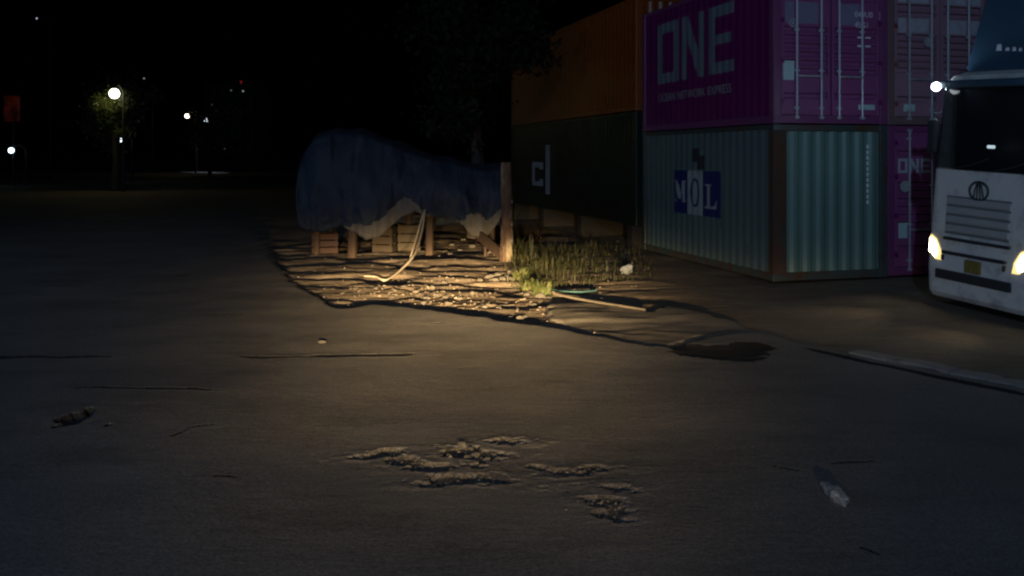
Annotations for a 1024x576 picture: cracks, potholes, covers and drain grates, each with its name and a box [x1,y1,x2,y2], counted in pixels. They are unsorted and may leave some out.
pothole [316,433,565,493]
crack [844,540,906,566]
crack [753,457,900,478]
crack [225,350,449,361]
crack [161,421,231,439]
crack [56,384,233,393]
crack [191,471,256,484]
